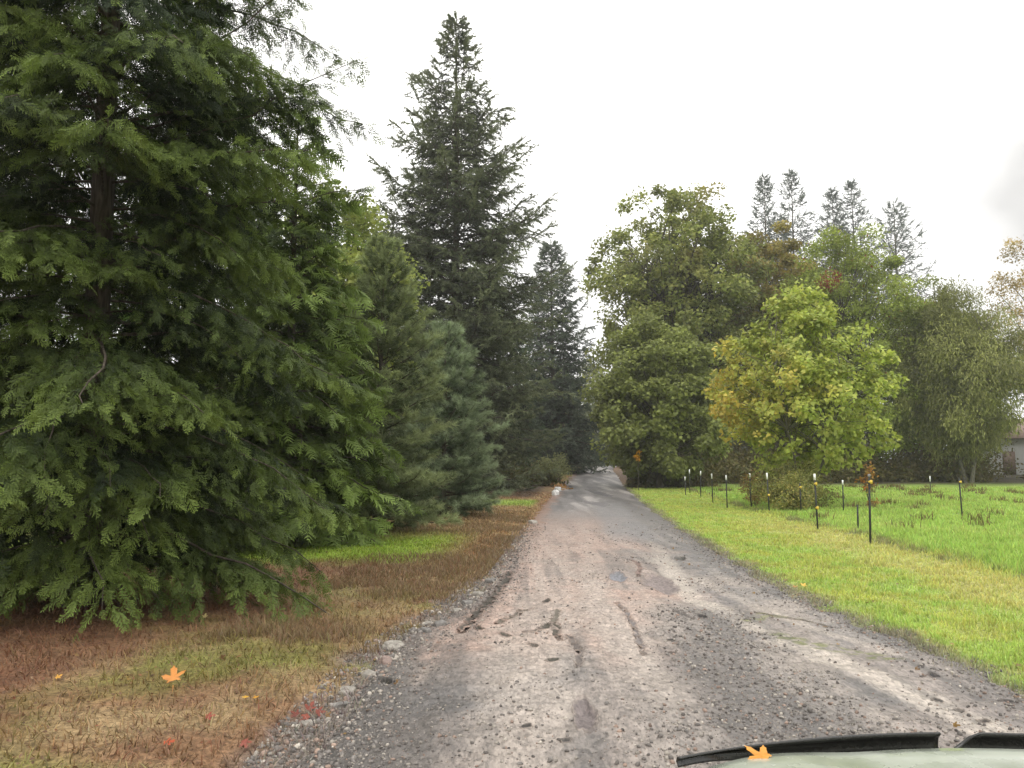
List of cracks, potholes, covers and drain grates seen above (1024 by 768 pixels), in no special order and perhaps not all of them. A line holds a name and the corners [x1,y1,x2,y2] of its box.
pothole [572,694,599,734]
pothole [607,571,629,583]
pothole [639,574,683,597]
